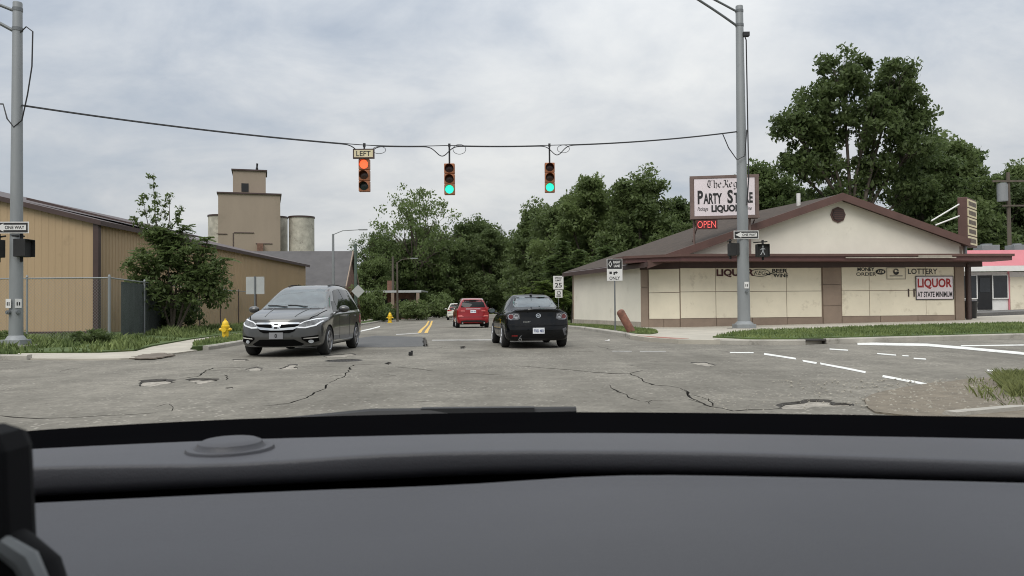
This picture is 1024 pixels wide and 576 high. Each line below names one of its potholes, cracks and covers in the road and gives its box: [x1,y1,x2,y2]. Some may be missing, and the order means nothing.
crack [269,364,370,406]
pothole [776,399,854,409]
crack [4,404,173,419]
pothole [138,379,175,387]
crack [526,361,779,411]
